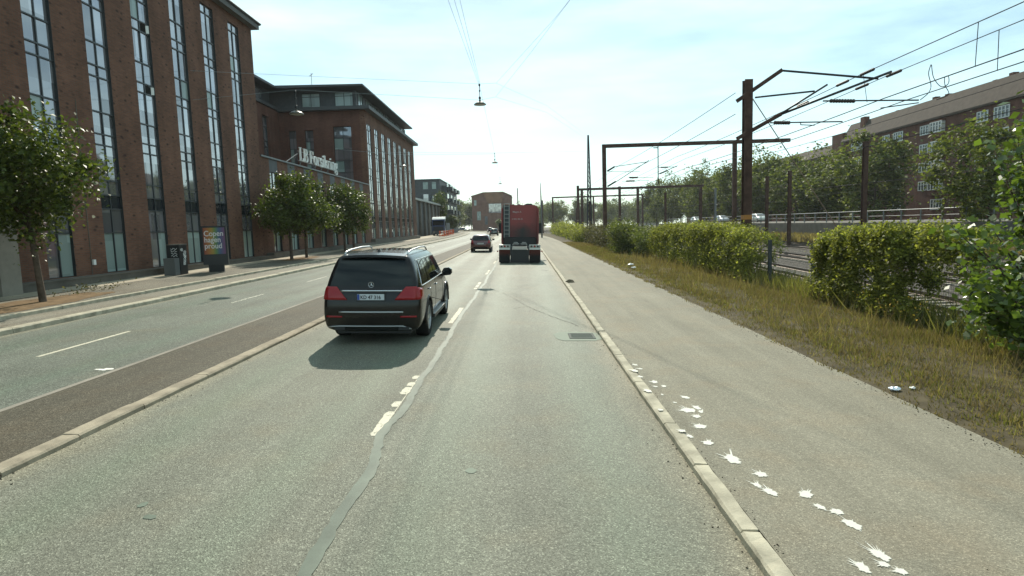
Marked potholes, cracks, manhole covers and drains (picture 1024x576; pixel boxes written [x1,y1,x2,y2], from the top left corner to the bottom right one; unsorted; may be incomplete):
drain grate [553,332,601,341]
